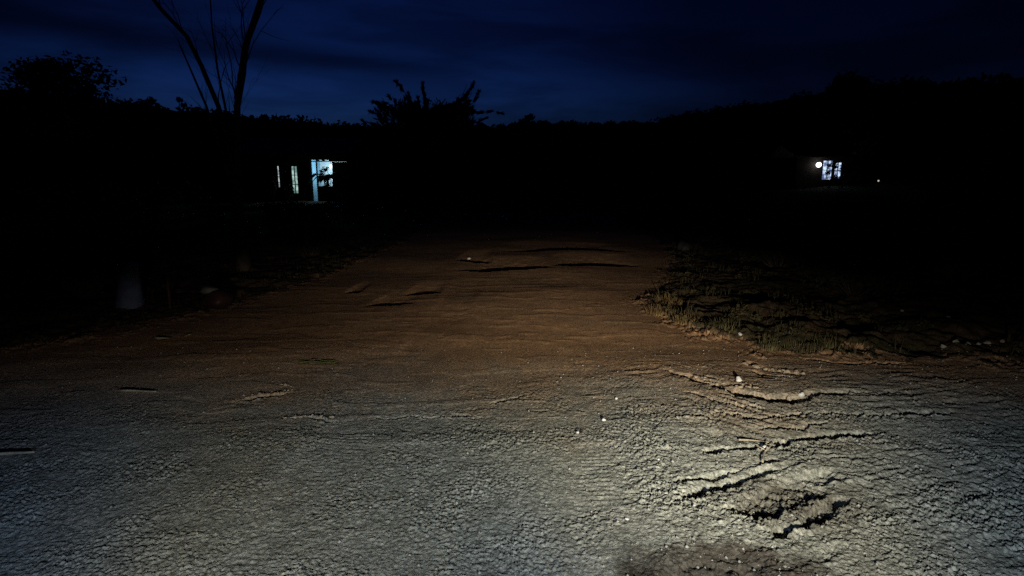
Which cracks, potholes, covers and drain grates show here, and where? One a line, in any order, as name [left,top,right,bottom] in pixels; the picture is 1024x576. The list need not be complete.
pothole [361,297,422,307]
pothole [399,288,446,296]
pothole [667,463,845,522]
crack [663,357,958,456]
